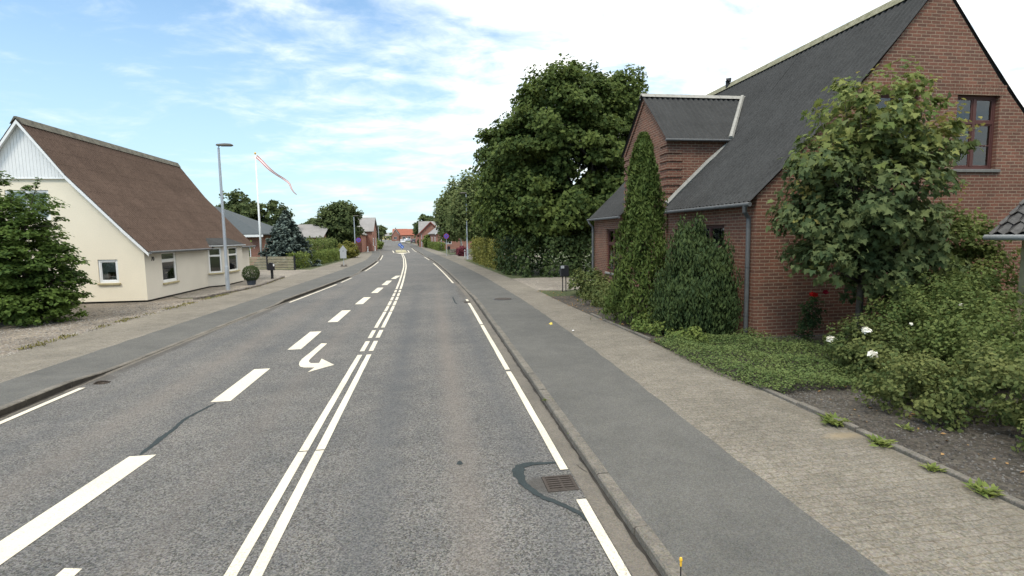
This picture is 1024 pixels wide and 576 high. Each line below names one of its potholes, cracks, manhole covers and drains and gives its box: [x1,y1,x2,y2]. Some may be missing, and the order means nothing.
drain grate [541,474,580,492]
